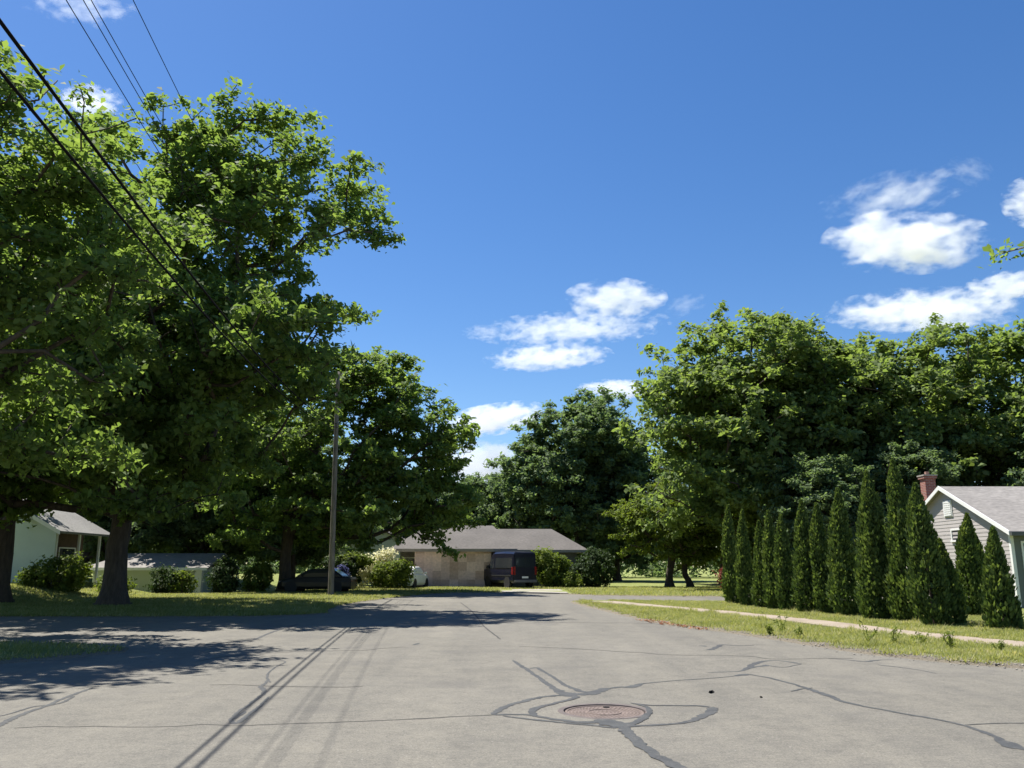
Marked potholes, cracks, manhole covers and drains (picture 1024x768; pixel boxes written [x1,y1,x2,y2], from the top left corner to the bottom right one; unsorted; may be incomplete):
manhole cover [558,703,647,719]
crack [21,715,488,728]
